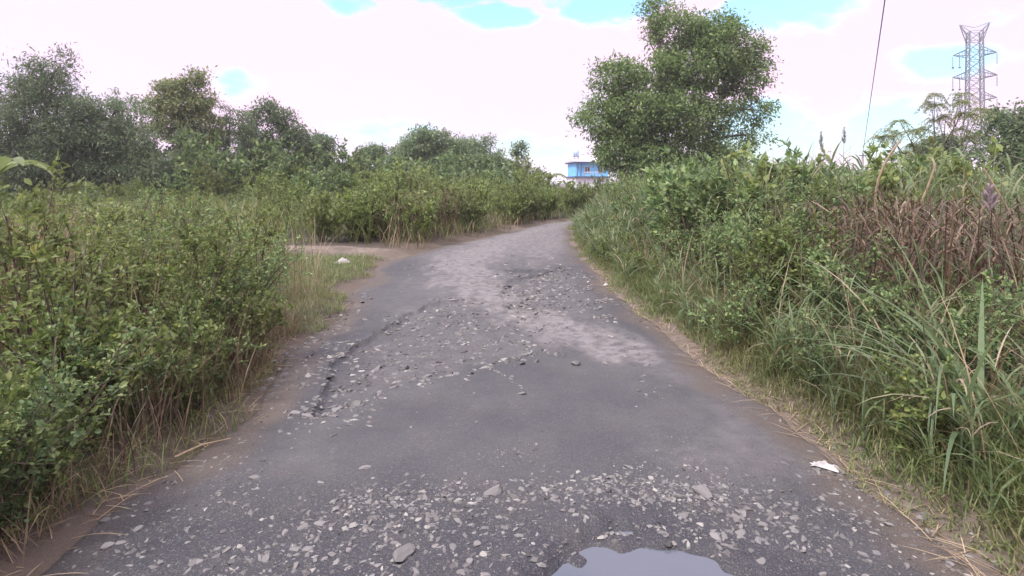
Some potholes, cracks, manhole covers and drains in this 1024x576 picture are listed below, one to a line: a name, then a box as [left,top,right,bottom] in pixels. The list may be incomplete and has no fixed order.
pothole [469,505,790,576]
